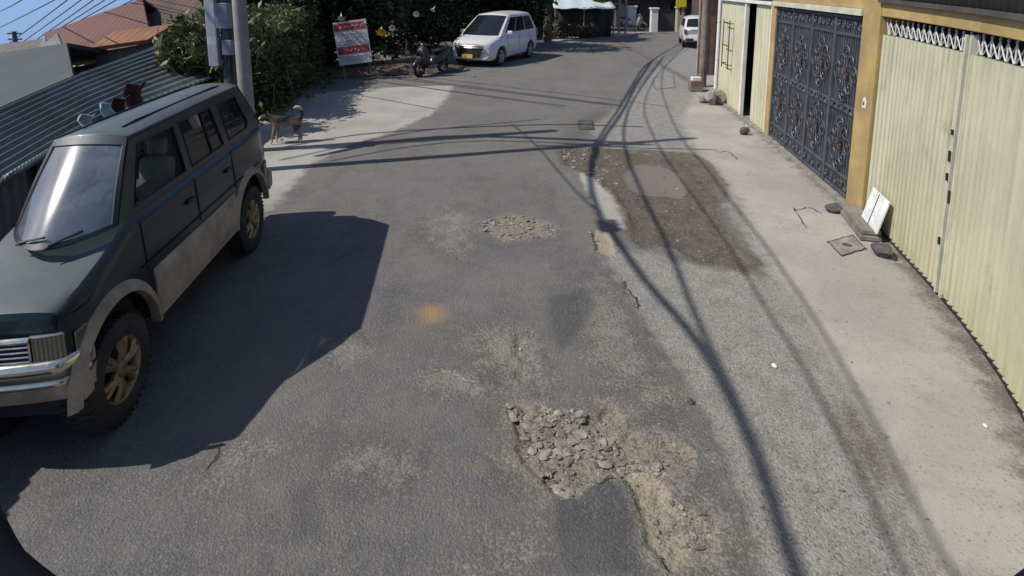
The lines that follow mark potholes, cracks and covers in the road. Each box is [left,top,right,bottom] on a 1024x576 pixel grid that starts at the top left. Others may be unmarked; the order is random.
manhole cover [827,235,867,256]
pothole [479,213,560,244]
crack [431,369,482,388]
crack [621,276,640,309]
crack [205,447,220,472]
manhole cover [578,120,594,130]
pothole [504,401,729,576]
